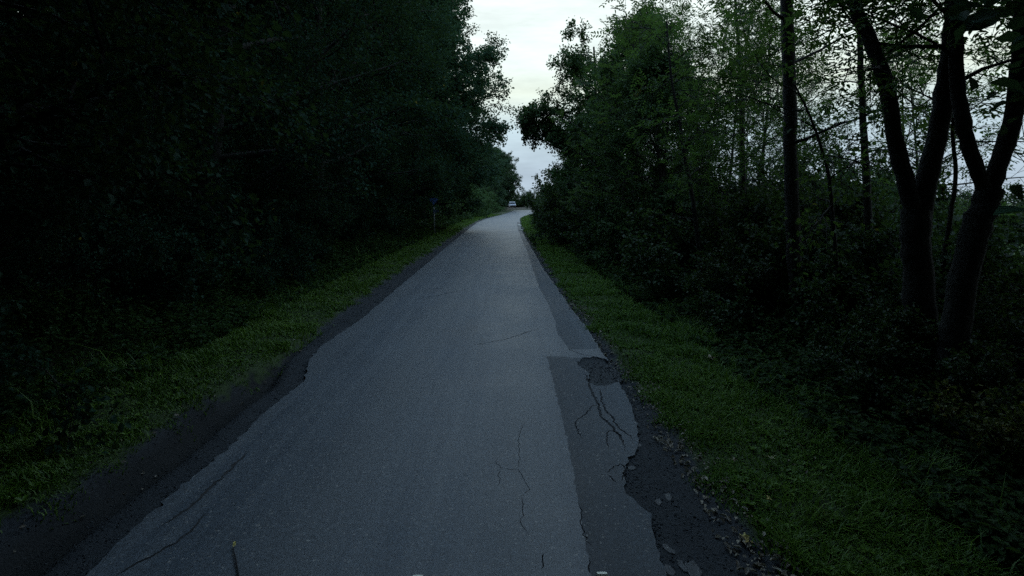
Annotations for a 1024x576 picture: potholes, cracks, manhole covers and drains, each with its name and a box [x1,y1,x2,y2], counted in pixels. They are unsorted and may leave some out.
pothole [577,357,623,386]
crack [574,375,632,481]
crack [496,423,530,533]
crack [115,452,248,576]
